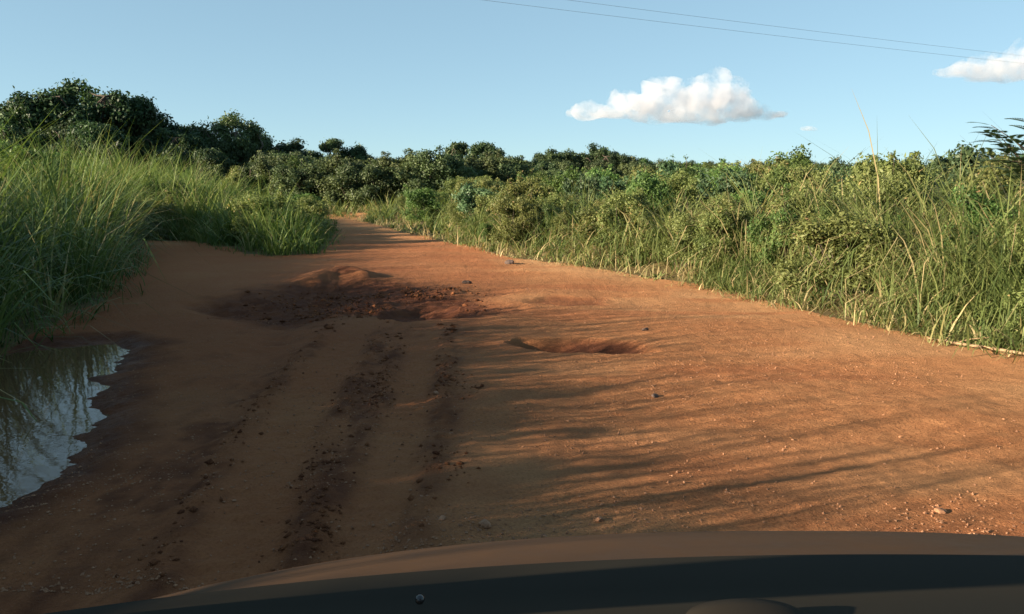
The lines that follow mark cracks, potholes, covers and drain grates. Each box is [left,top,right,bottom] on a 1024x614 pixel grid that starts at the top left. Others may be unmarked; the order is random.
pothole [373,301,466,324]
pothole [504,336,663,355]
